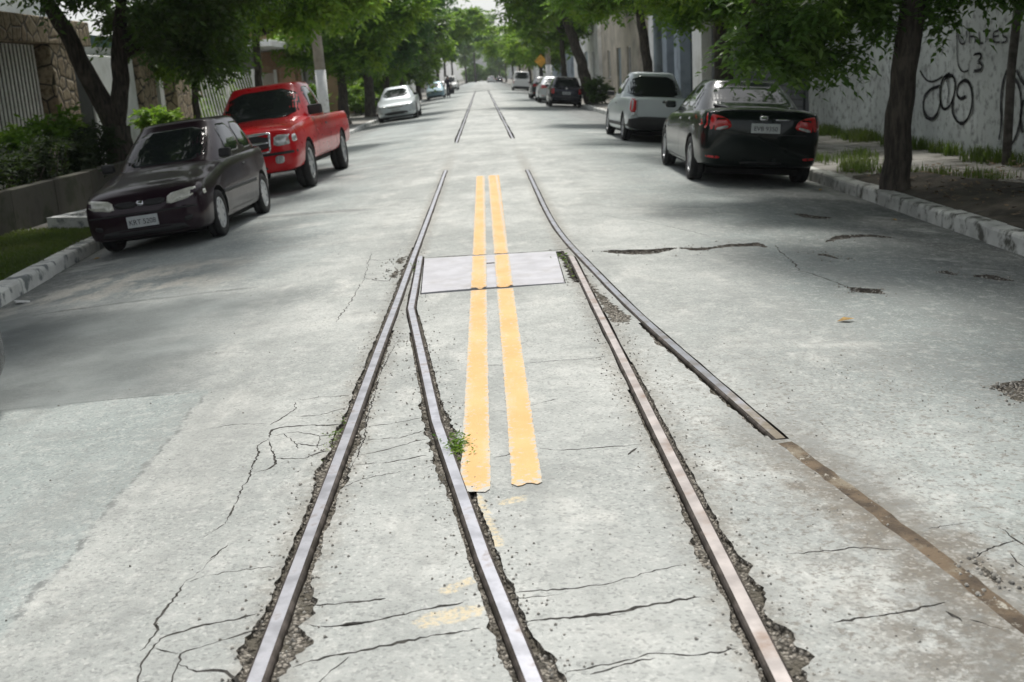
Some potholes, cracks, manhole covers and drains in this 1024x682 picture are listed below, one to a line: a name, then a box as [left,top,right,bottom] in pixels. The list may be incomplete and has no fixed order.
crack [137,395,348,682]
crack [833,602,1001,629]
manhole cover [421,251,565,294]
crack [294,598,481,682]
crack [568,649,730,675]
crack [928,521,1024,567]
pothole [991,379,1024,402]
crack [338,253,402,320]
crack [508,565,697,623]
